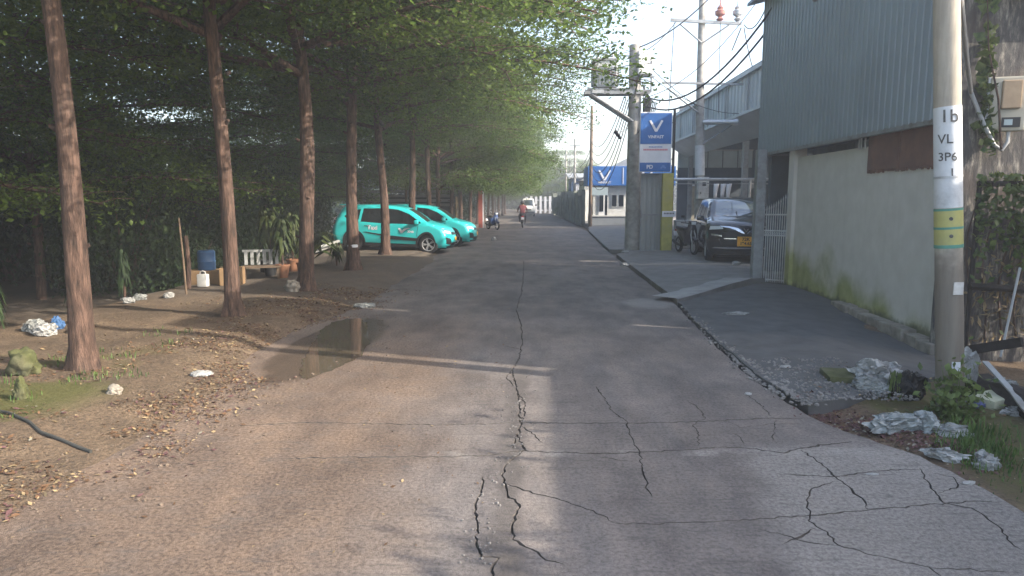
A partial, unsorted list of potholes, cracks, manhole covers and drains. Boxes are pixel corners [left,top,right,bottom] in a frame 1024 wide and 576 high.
crack [474,477,500,576]
crack [689,396,797,446]
crack [616,450,1022,576]
crack [596,388,652,497]
